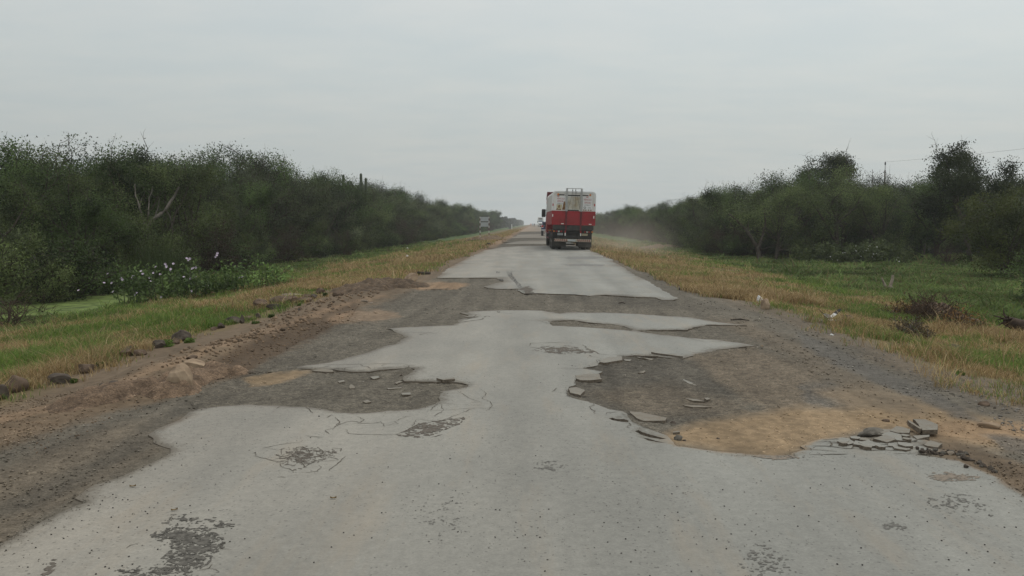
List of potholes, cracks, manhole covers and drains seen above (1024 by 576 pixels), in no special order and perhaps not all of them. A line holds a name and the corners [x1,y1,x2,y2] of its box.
crack [254,406,388,477]
pothole [189,367,468,414]
pothole [349,289,744,328]
pothole [548,320,633,331]
pothole [398,418,465,438]
pothole [417,277,518,290]
pothole [534,345,594,353]
pothole [568,348,905,455]
pothole [145,526,225,576]
crack [390,391,493,437]
